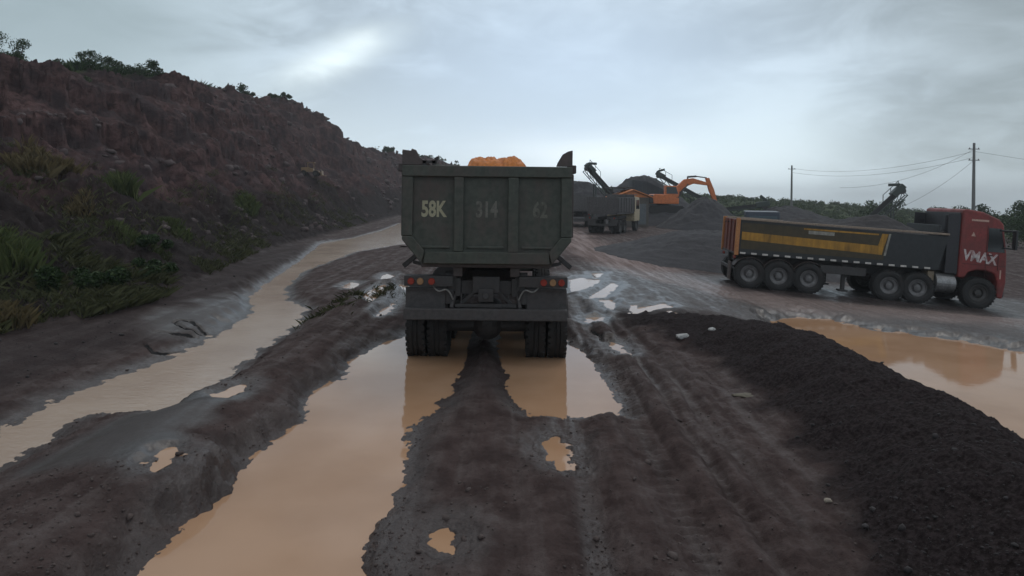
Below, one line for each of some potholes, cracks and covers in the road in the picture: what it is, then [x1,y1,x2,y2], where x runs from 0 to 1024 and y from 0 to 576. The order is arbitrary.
pothole [417,518,470,560]
pothole [532,430,585,476]
